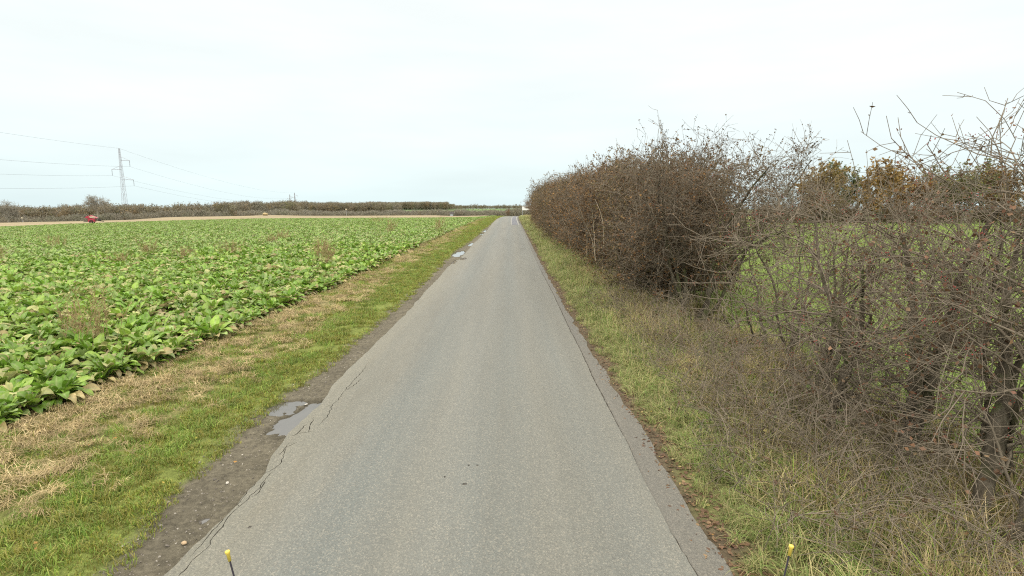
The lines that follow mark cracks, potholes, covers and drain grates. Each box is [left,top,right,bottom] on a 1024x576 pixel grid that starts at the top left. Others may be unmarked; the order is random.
crack [180,369,364,574]
